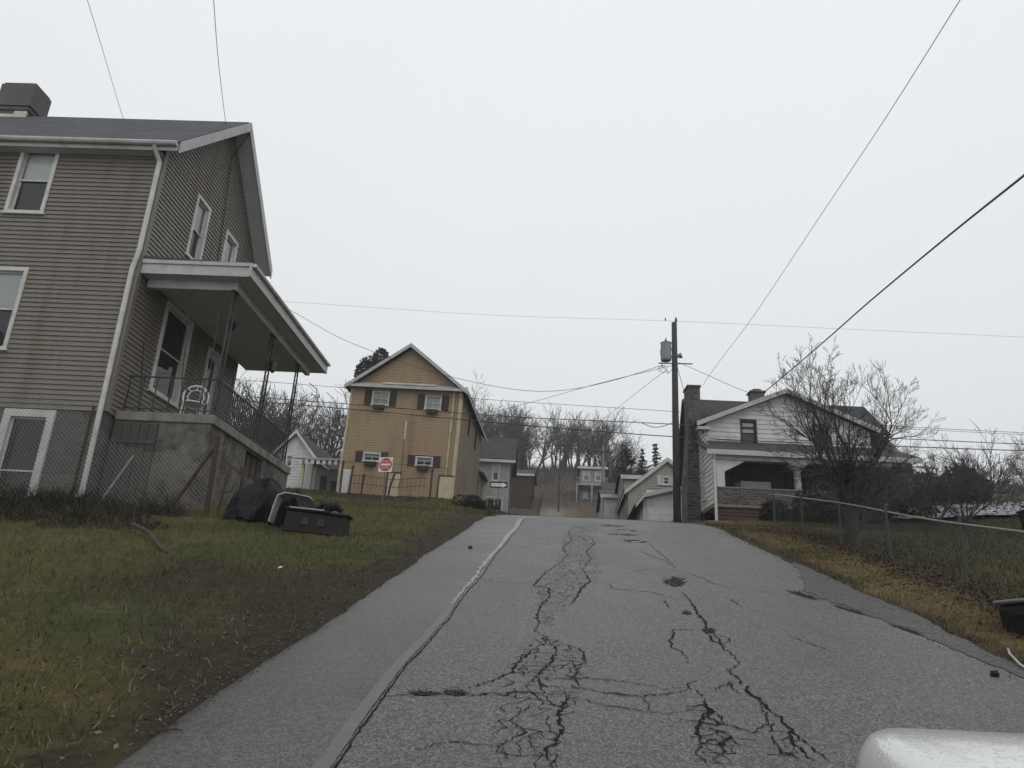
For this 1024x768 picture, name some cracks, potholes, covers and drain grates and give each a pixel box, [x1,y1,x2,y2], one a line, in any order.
pothole [664,576,685,586]
crack [389,522,828,768]
